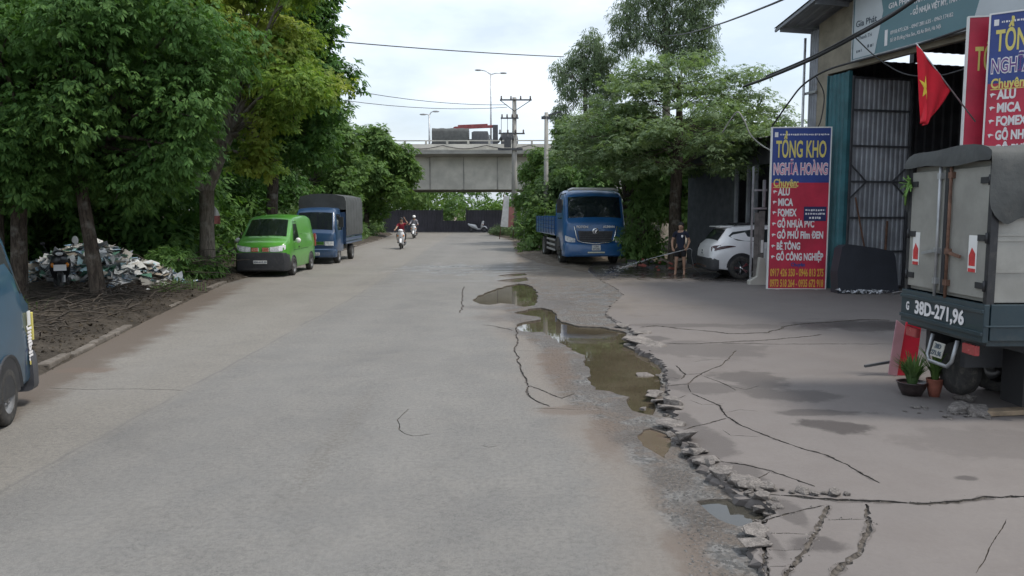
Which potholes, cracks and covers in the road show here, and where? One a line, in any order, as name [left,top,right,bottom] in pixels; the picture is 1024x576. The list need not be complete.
pothole [515,308,663,415]
crack [750,502,878,576]
crack [667,351,879,486]
pothole [473,284,538,307]
pothole [697,498,766,526]
crack [976,520,1006,573]
crack [490,325,580,410]
pothole [637,428,672,458]
crack [642,319,885,334]
